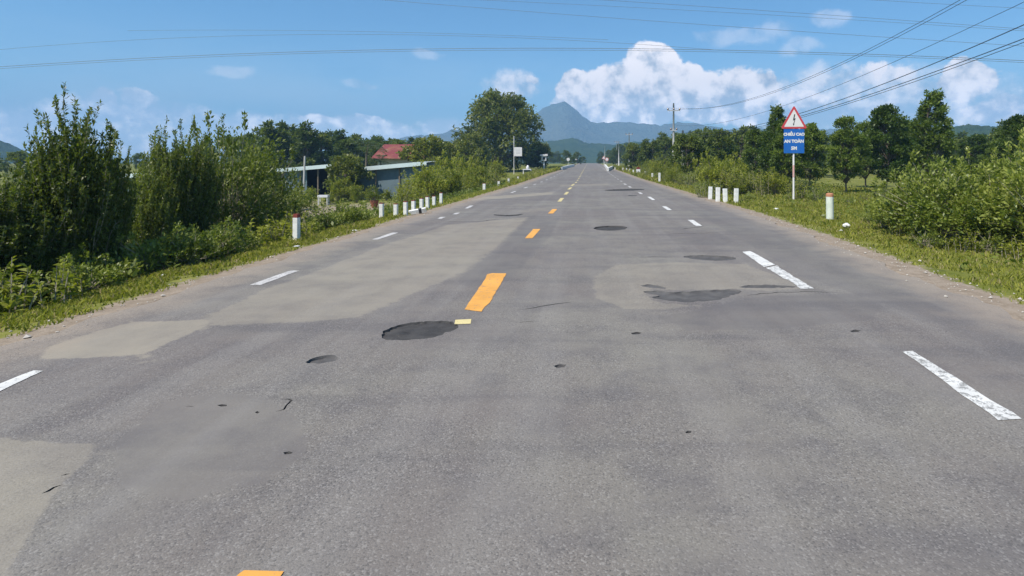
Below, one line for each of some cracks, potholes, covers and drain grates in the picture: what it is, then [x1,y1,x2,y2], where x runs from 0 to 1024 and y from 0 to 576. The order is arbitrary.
pothole [382,321,458,340]
pothole [306,355,338,364]
pothole [643,289,741,302]
